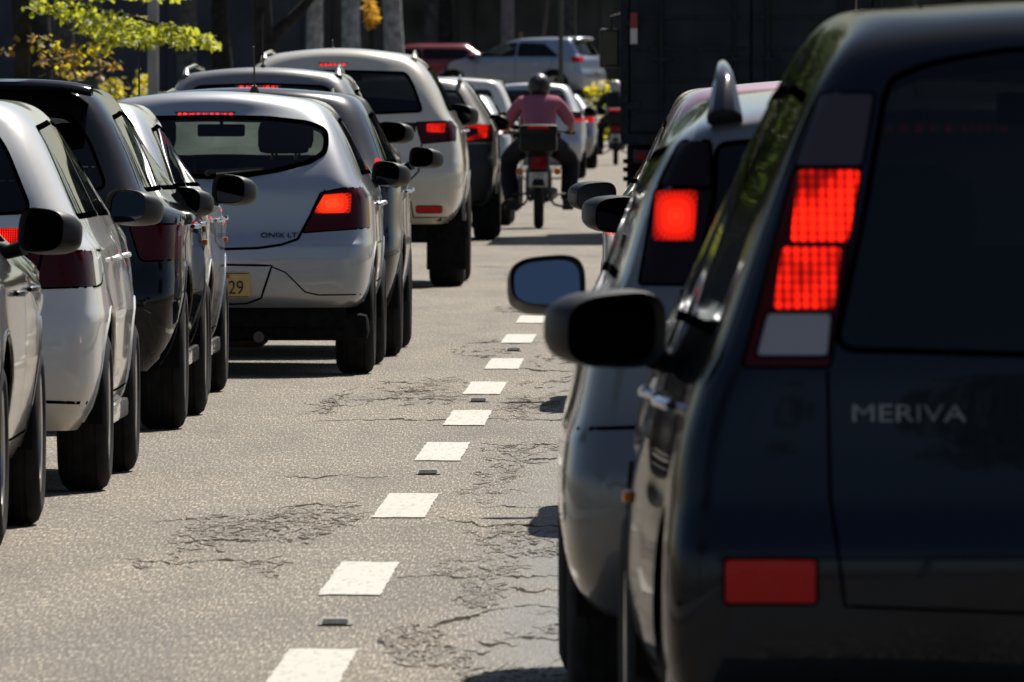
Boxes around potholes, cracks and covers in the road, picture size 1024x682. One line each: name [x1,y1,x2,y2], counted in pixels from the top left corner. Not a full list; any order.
crack [298,339,573,421]
crack [123,500,370,578]
crack [377,442,567,682]
